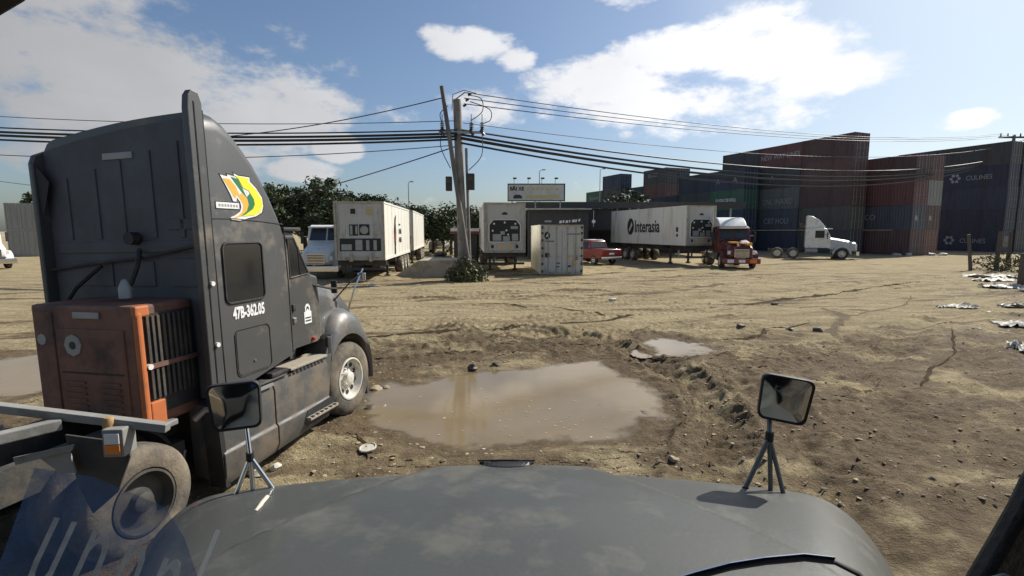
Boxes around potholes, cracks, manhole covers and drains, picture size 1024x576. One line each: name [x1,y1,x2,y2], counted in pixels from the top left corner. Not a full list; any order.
crack [920,325,957,387]
pothole [629,330,740,362]
pothole [332,350,705,468]
